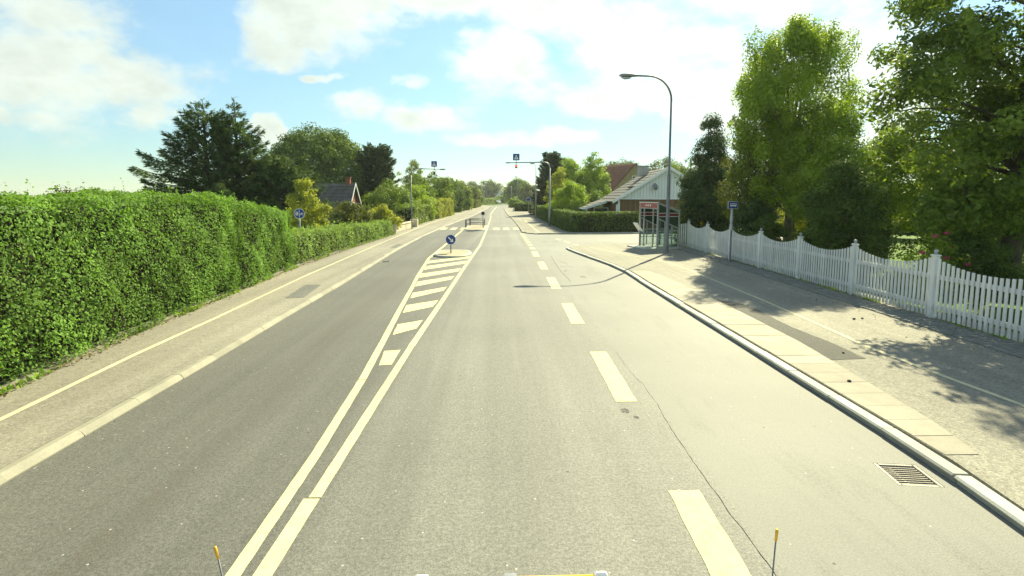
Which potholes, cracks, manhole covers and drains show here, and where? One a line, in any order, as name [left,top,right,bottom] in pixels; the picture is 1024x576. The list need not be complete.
crack [618,355,776,576]
drain grate [873,463,944,487]
